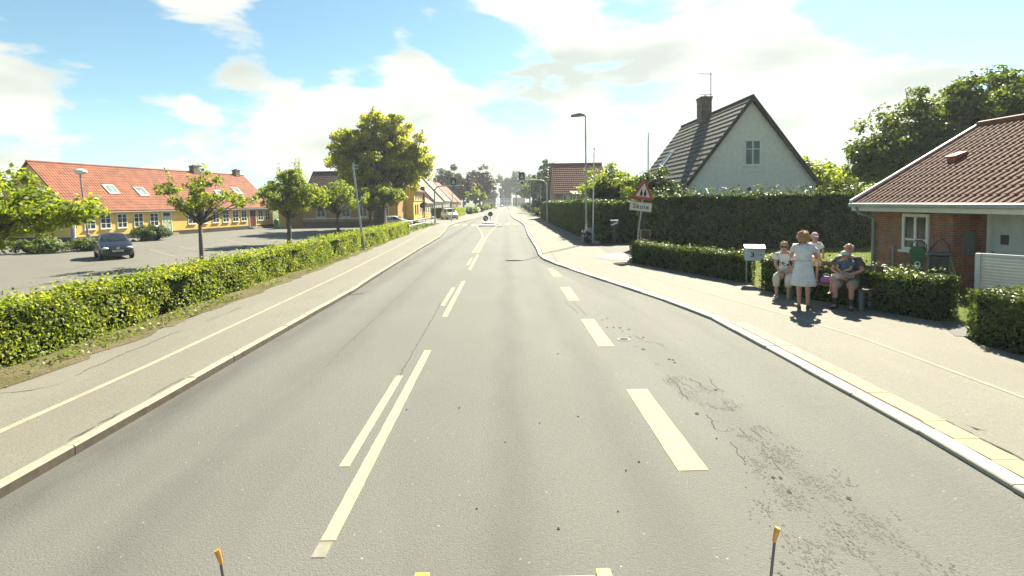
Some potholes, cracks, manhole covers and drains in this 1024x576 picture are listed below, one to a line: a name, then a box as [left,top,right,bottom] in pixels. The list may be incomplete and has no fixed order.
crack [655,362,784,474]
